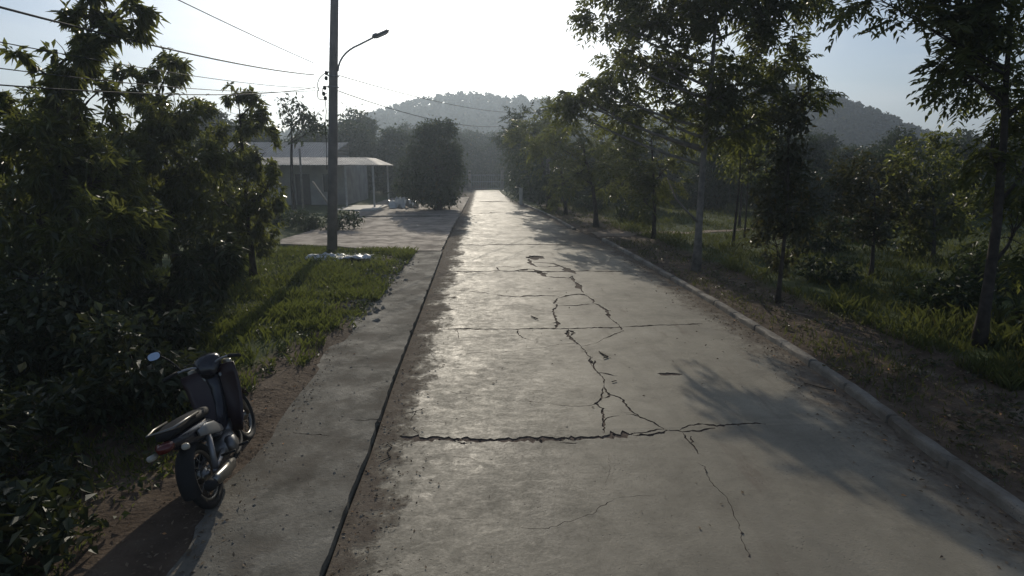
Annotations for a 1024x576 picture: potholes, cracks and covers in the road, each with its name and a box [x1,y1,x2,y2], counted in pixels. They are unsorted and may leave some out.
crack [400,259,761,558]
